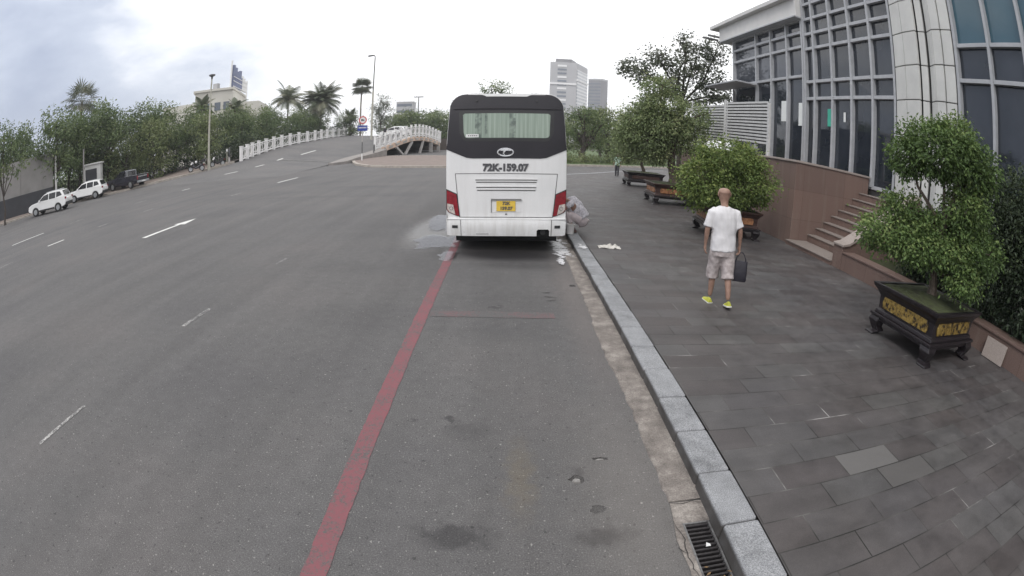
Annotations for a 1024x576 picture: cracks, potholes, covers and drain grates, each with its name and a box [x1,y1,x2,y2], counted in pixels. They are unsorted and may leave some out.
pothole [568,475,584,484]
drain grate [682,520,733,576]
pothole [590,505,606,514]
